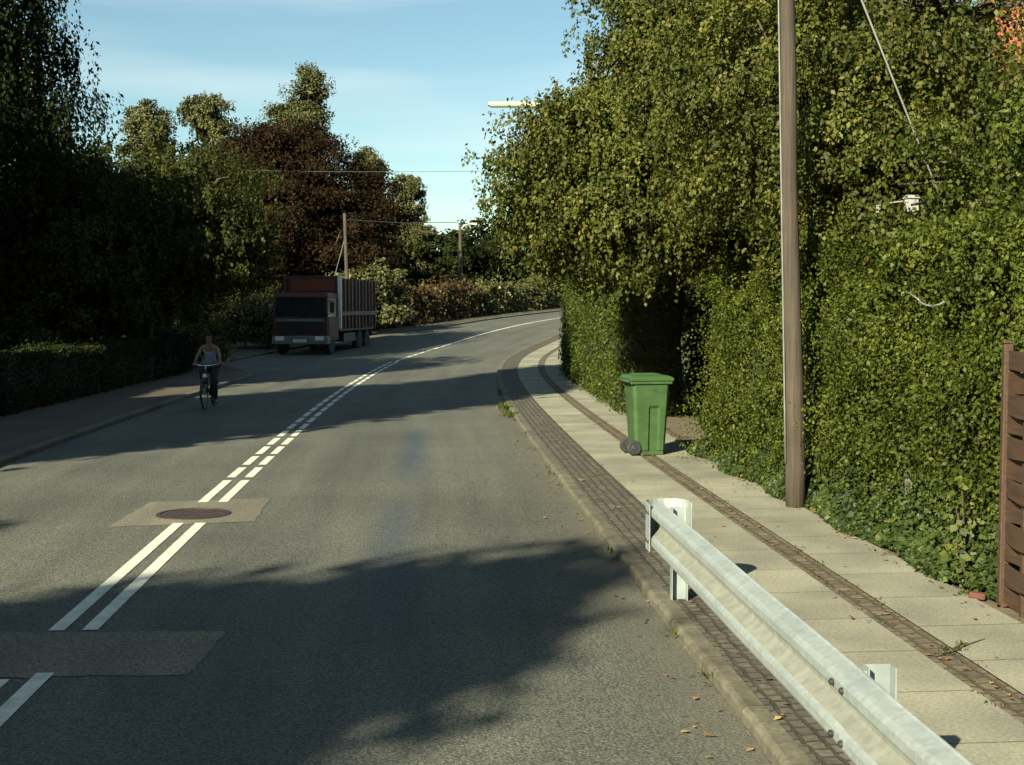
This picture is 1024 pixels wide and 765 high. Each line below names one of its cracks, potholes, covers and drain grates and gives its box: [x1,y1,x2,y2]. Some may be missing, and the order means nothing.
manhole cover [156,508,231,520]
